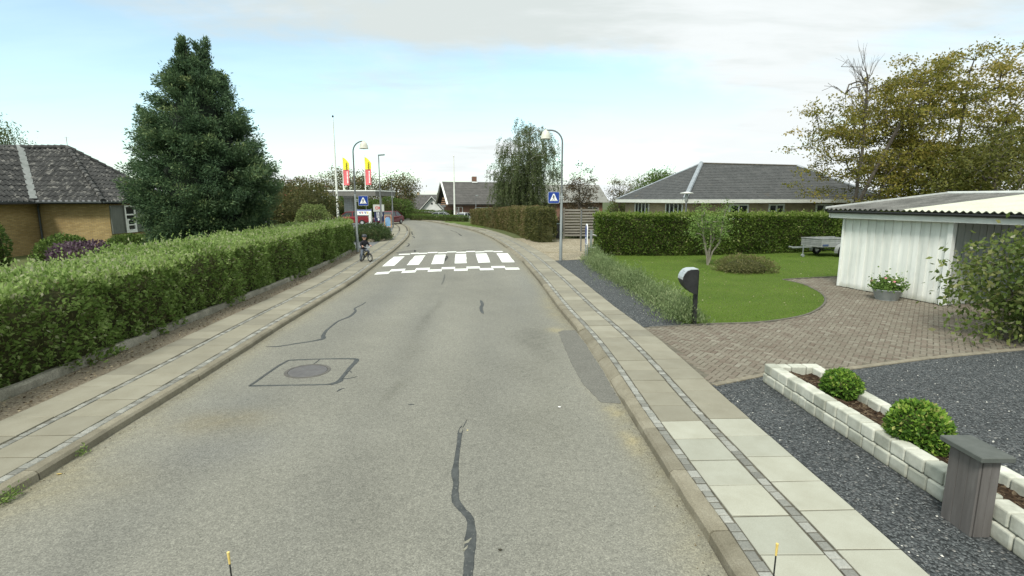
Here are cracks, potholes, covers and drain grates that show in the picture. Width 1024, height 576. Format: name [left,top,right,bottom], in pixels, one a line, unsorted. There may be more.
manhole cover [284,364,331,378]
